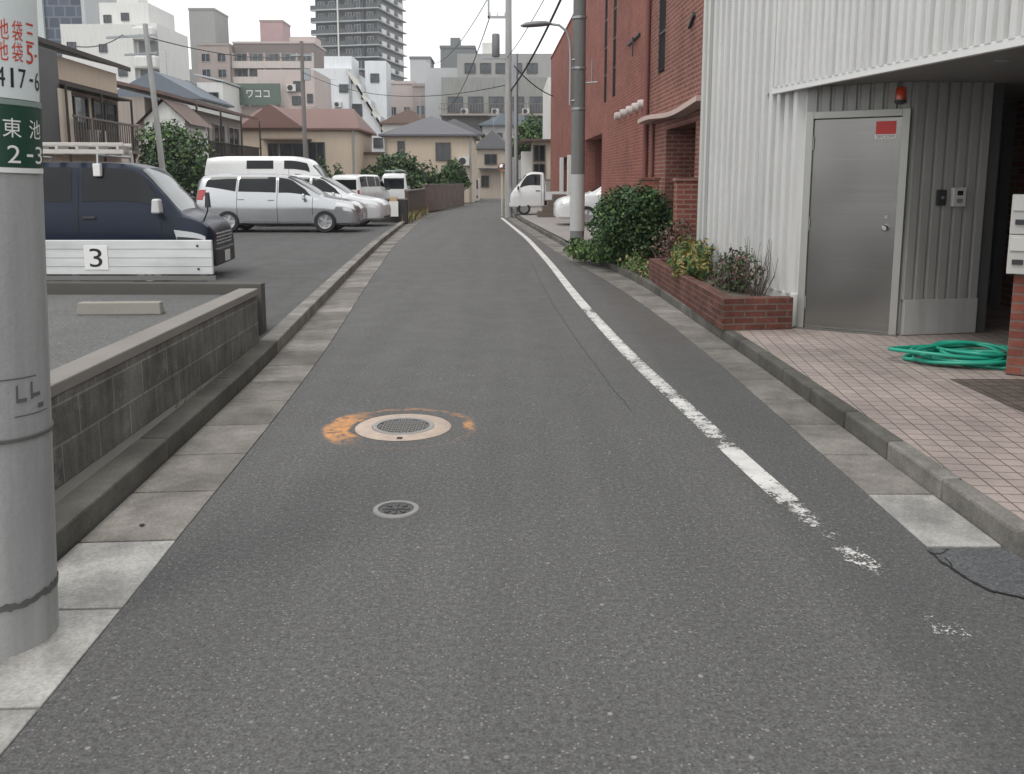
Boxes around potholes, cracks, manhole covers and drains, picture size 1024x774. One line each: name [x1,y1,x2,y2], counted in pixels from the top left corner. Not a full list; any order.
crack [925,547,1024,598]
manhole cover [373,500,420,519]
manhole cover [355,414,451,441]
